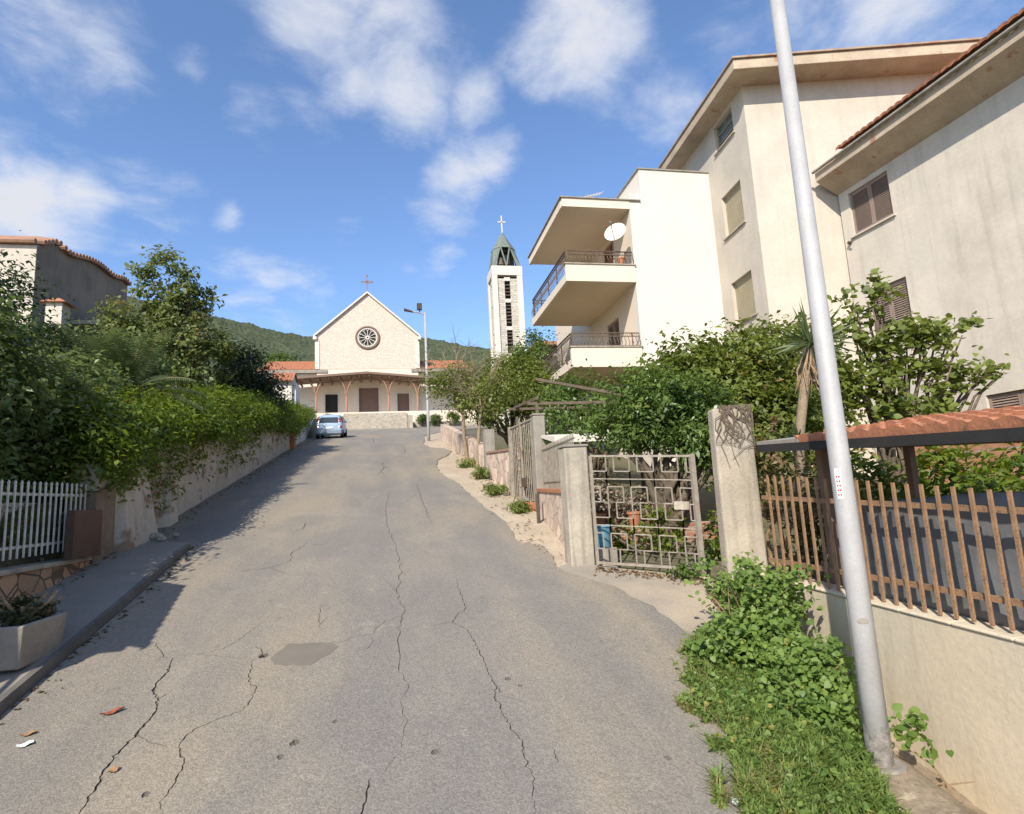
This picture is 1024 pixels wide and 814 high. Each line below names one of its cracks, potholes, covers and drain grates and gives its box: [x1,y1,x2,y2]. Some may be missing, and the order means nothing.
crack [342,490,409,774]
crack [360,779,370,814]
crack [79,621,265,814]
crack [444,581,536,813]
